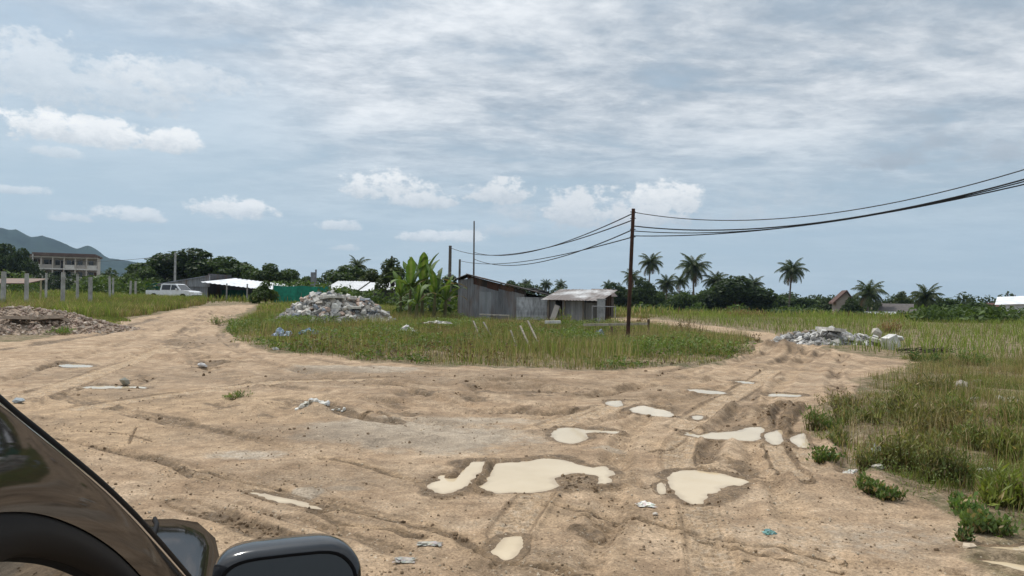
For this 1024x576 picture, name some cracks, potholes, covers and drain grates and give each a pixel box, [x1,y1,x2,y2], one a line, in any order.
pothole [656,465,760,507]
pothole [762,427,787,445]
pothole [244,489,328,511]
pothole [677,425,772,443]
pothole [415,455,627,498]
pothole [682,388,731,396]
pothole [623,404,680,418]
pothole [482,532,532,563]
pothole [786,432,814,449]
pothole [543,425,627,446]
pothole [652,481,669,495]
pothole [600,399,628,407]
